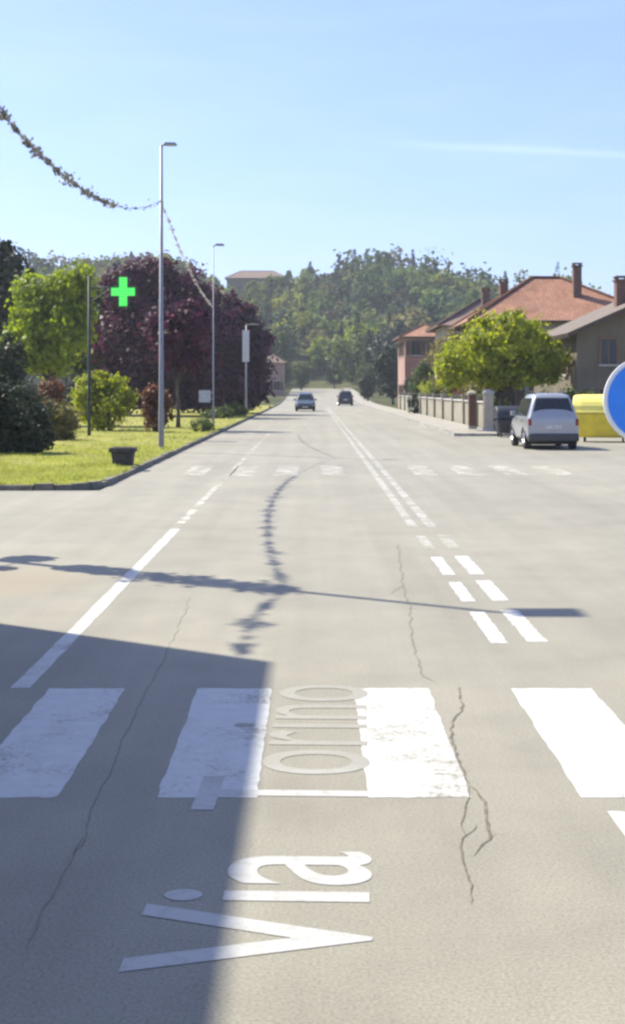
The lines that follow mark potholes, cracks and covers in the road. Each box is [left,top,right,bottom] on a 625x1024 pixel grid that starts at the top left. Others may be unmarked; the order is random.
crack [449,688,508,902]
crack [391,545,431,680]
crack [26,599,190,953]
